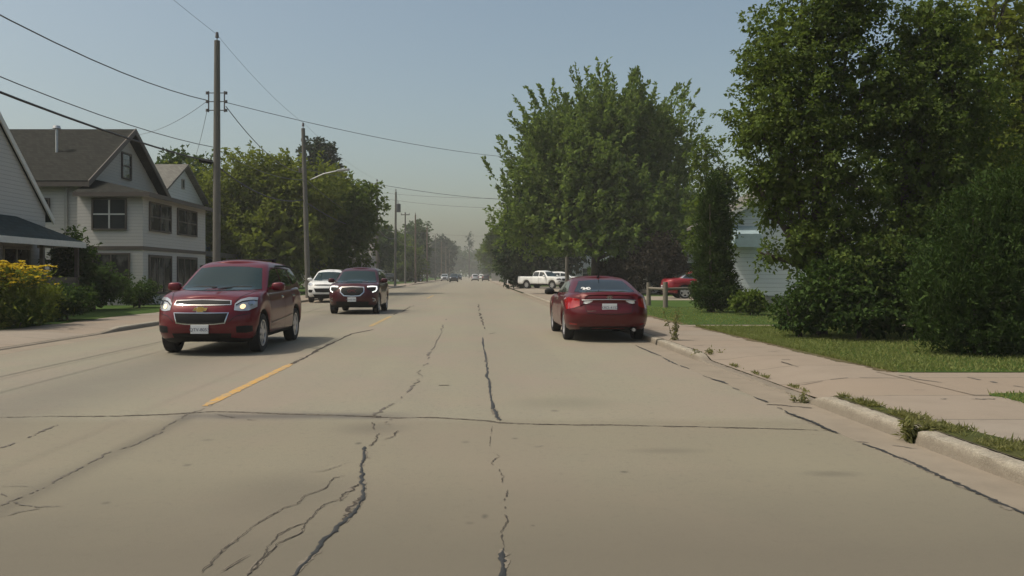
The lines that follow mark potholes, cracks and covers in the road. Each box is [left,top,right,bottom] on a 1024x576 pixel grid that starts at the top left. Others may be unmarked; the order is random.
crack [202,462,348,576]
crack [1,404,213,515]
crack [373,319,447,415]
